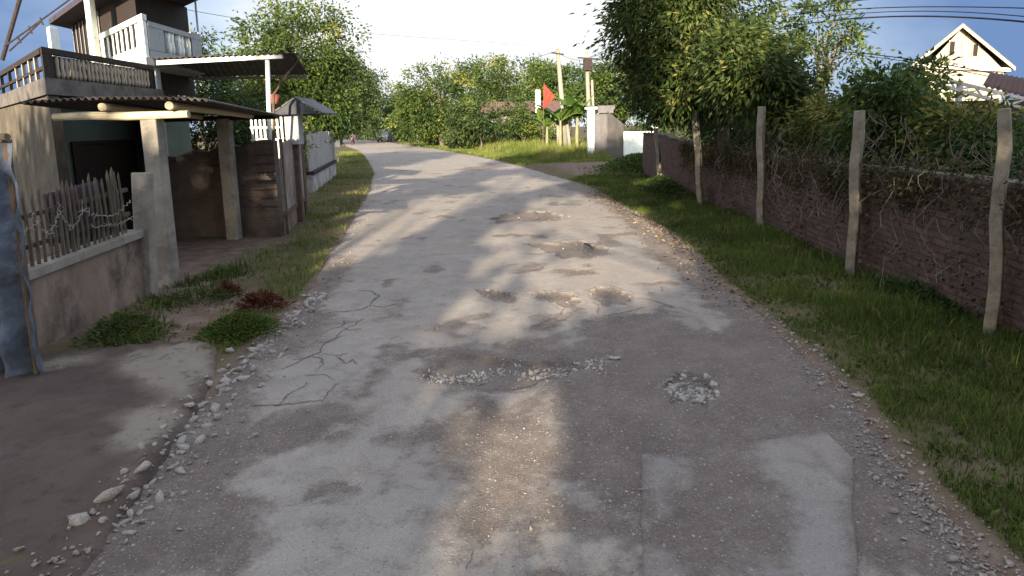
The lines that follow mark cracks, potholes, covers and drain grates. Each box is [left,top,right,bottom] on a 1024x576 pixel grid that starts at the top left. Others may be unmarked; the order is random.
crack [250,290,400,406]
pothole [483,210,570,224]
pothole [655,368,727,416]
pothole [523,289,586,310]
pothole [472,288,522,304]
pothole [584,285,639,308]
pothole [522,239,618,261]
pothole [409,351,613,396]
